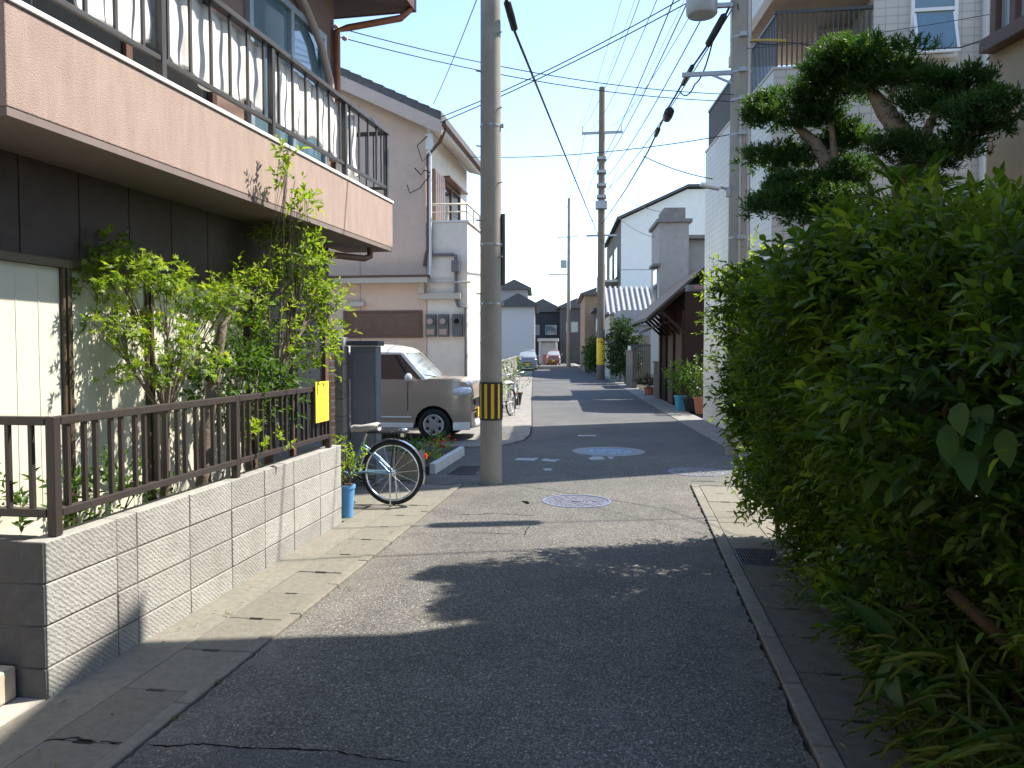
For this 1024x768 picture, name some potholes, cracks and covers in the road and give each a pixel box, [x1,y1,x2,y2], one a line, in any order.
manhole cover [542,494,612,508]
manhole cover [572,447,645,456]
crack [148,743,408,763]
drain grate [732,548,789,567]
crack [45,736,122,745]
manhole cover [668,467,728,477]
